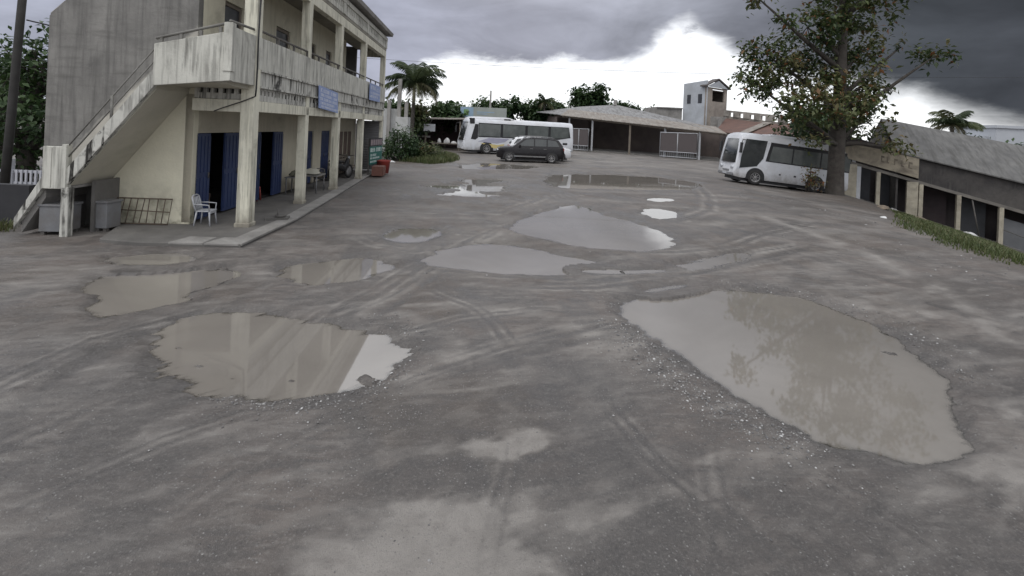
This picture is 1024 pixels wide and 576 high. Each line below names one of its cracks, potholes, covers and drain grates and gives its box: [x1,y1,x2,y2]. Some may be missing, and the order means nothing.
pothole [381,174,552,204]
pothole [403,237,635,281]
pothole [362,222,462,246]
pothole [38,258,262,328]
pothole [90,297,449,427]
pothole [589,279,1024,499]
pothole [254,249,413,292]
pothole [525,172,726,193]
pothole [490,202,698,255]
